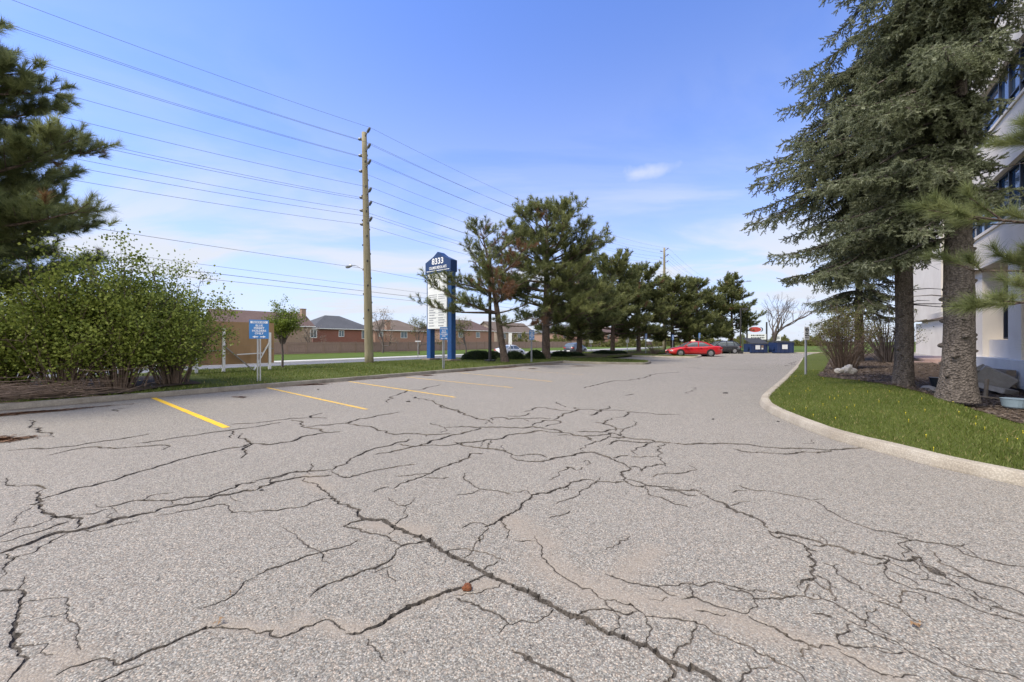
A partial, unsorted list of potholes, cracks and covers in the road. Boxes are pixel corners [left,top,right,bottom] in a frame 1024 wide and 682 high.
crack [0,385,1024,682]
